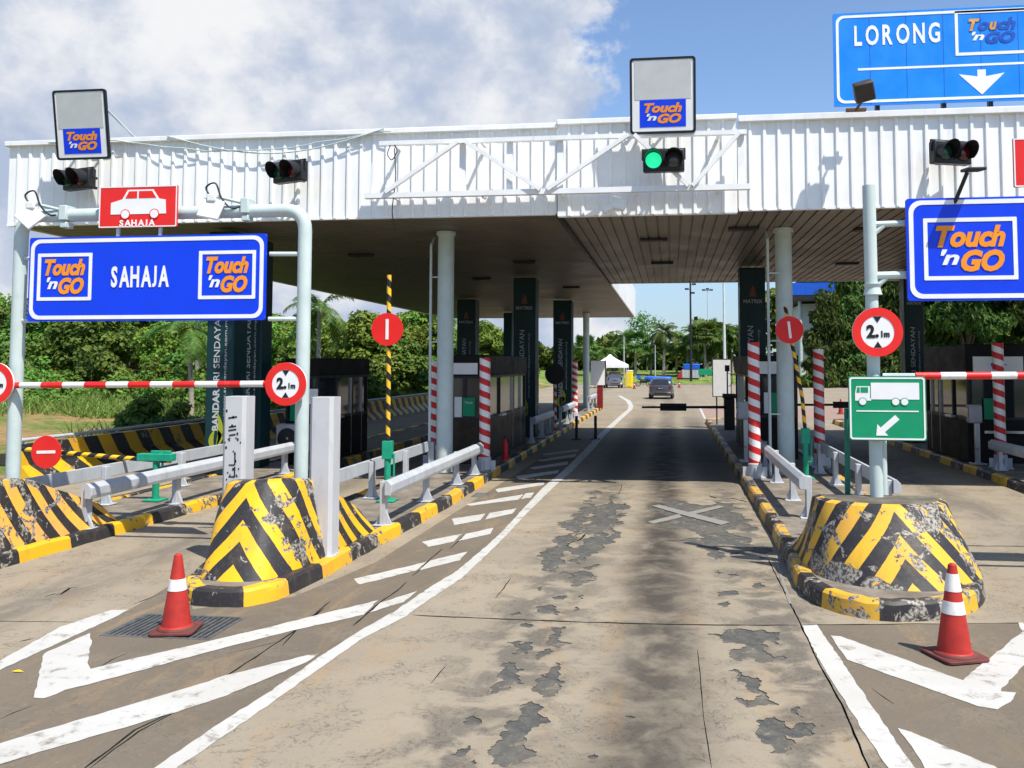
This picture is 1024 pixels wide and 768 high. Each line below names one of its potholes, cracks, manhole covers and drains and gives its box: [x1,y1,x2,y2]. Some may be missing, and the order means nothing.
pothole [490,662,524,694]
pothole [755,716,815,754]
drain grate [99,613,246,640]
pothole [487,701,551,767]
pothole [708,628,787,663]
pothole [537,493,630,572]
crack [697,650,712,768]
pothole [531,662,564,697]
pothole [567,564,600,587]
